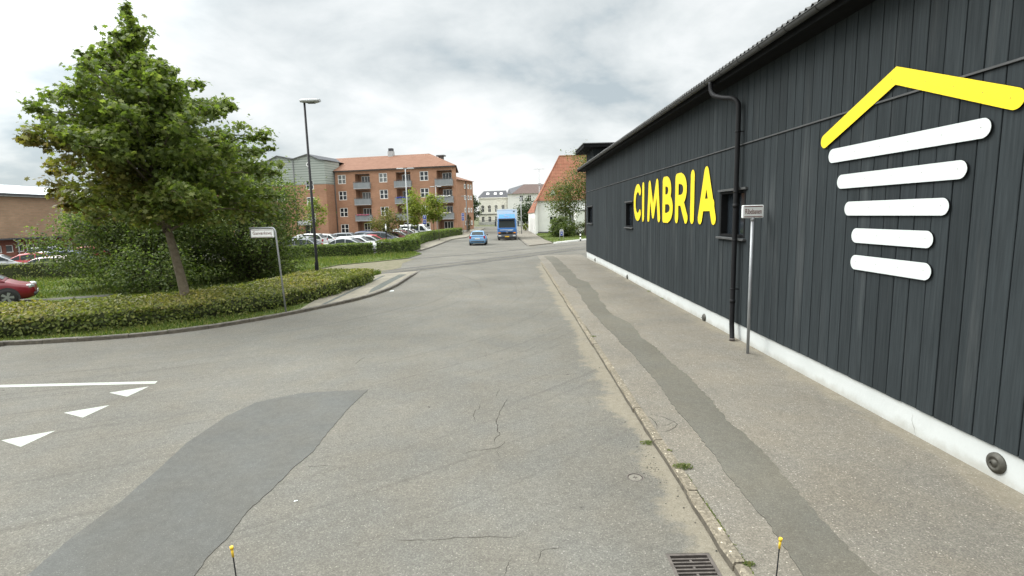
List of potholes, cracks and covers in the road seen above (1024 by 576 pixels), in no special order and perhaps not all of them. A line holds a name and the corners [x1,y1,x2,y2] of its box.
manhole cover [626,473,644,482]
drain grate [666,553,722,576]
crack [467,390,507,453]
